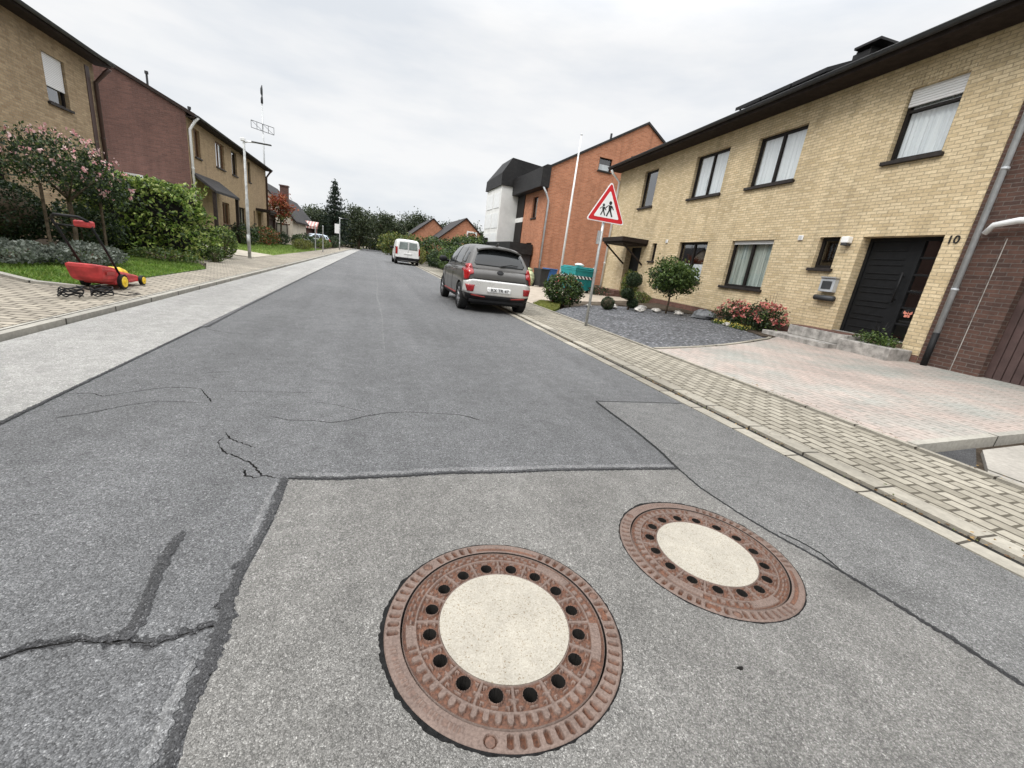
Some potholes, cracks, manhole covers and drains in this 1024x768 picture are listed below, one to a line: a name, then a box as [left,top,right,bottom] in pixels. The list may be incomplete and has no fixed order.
crack [238,391,479,423]
manhole cover [618,502,807,624]
crack [0,620,216,661]
manhole cover [378,544,624,758]
crack [214,432,280,485]
crack [57,372,212,418]
